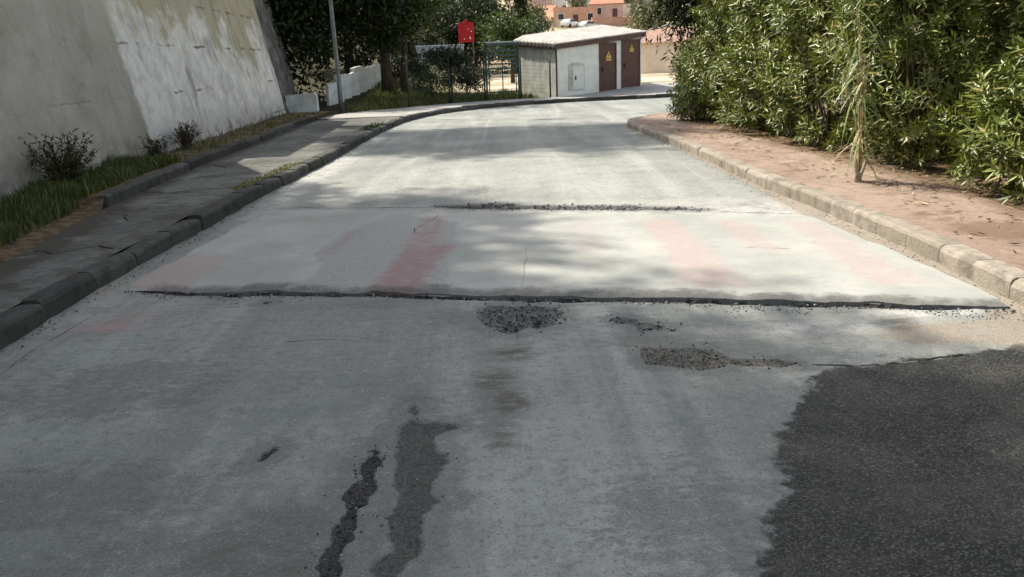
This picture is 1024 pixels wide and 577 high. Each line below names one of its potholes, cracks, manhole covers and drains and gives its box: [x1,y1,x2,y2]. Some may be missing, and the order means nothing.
pothole [250,446,280,464]
crack [380,207,439,234]
pothole [624,341,801,375]
pothole [592,314,682,335]
pothole [474,301,578,337]
